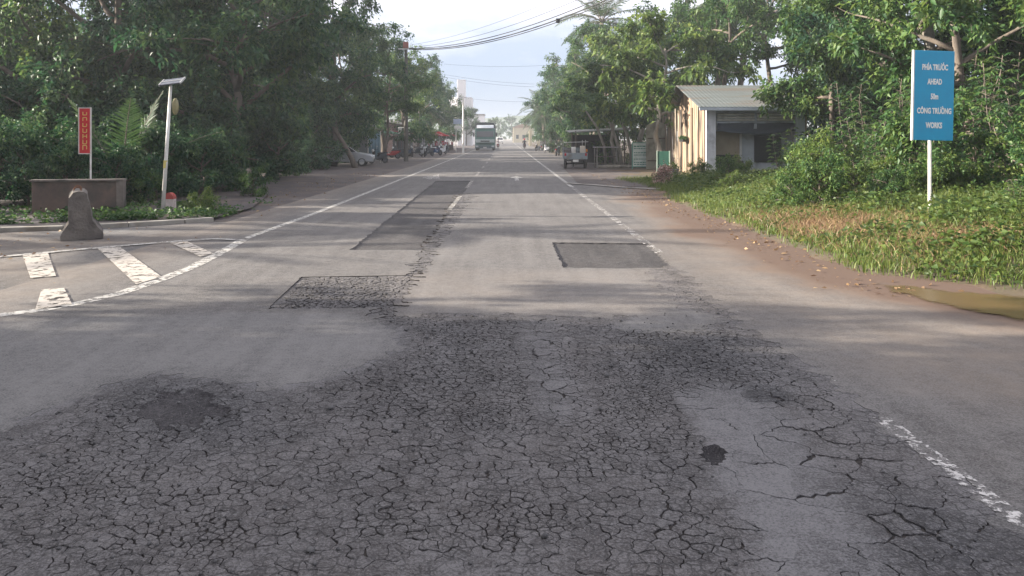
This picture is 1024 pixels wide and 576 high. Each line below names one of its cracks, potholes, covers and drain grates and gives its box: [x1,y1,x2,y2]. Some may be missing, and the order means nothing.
pothole [700,444,728,465]
pothole [137,388,231,430]
crack [0,266,1024,576]
